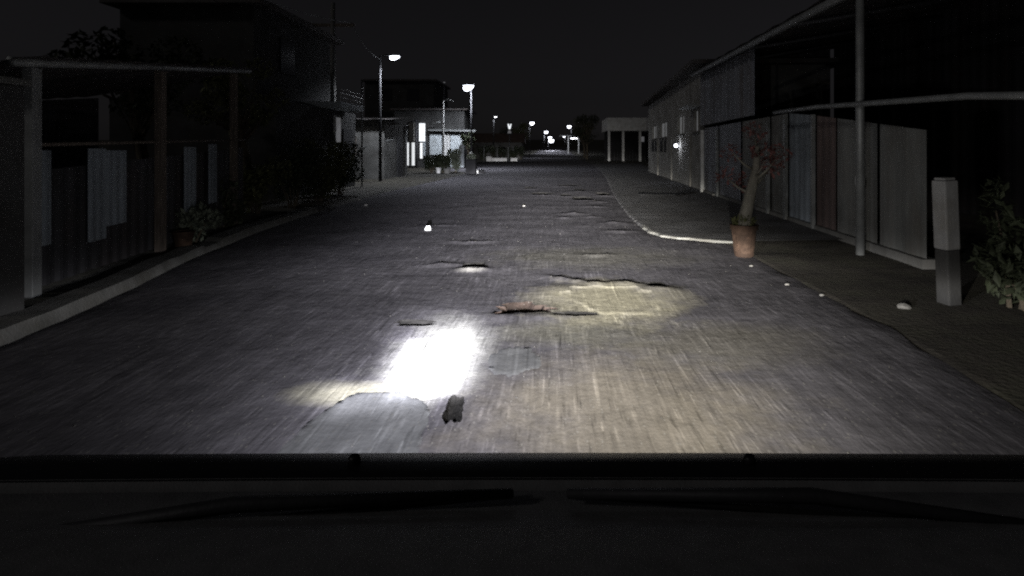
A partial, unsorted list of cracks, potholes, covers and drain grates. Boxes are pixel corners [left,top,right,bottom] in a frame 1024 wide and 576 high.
pothole [495,301,557,314]
pothole [442,395,465,424]
